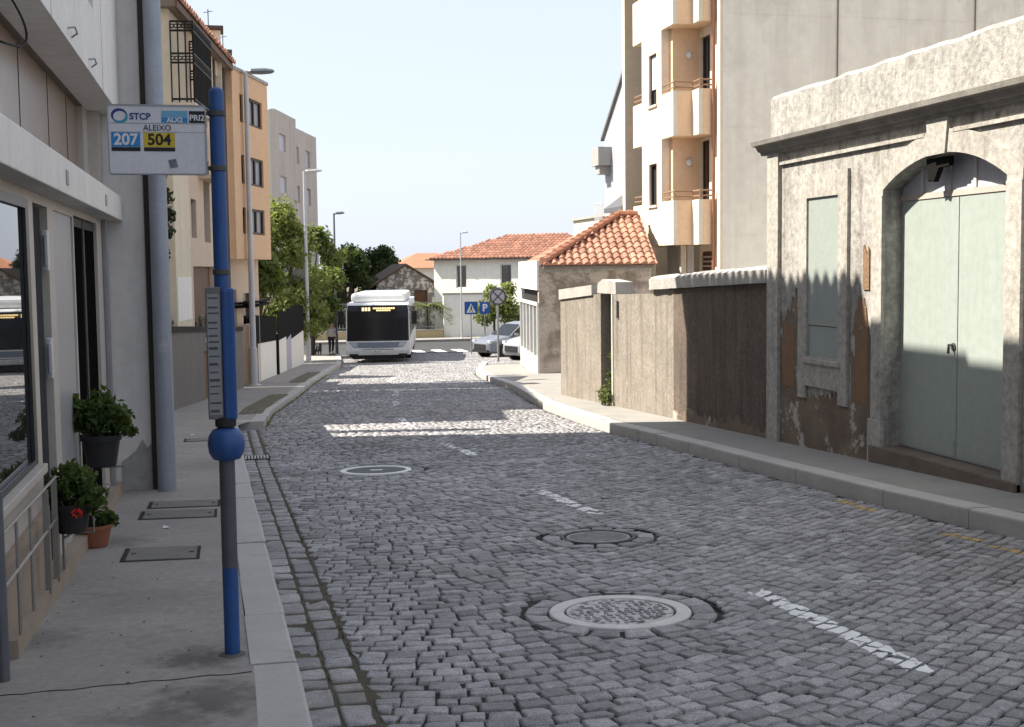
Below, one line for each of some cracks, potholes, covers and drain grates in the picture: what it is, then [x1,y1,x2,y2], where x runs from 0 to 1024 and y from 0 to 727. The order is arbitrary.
utility cover [119,545,201,562]
manhole cover [549,595,691,632]
manhole cover [340,465,412,476]
manhole cover [560,530,636,546]
utility cover [147,499,220,509]
utility cover [138,509,217,520]
